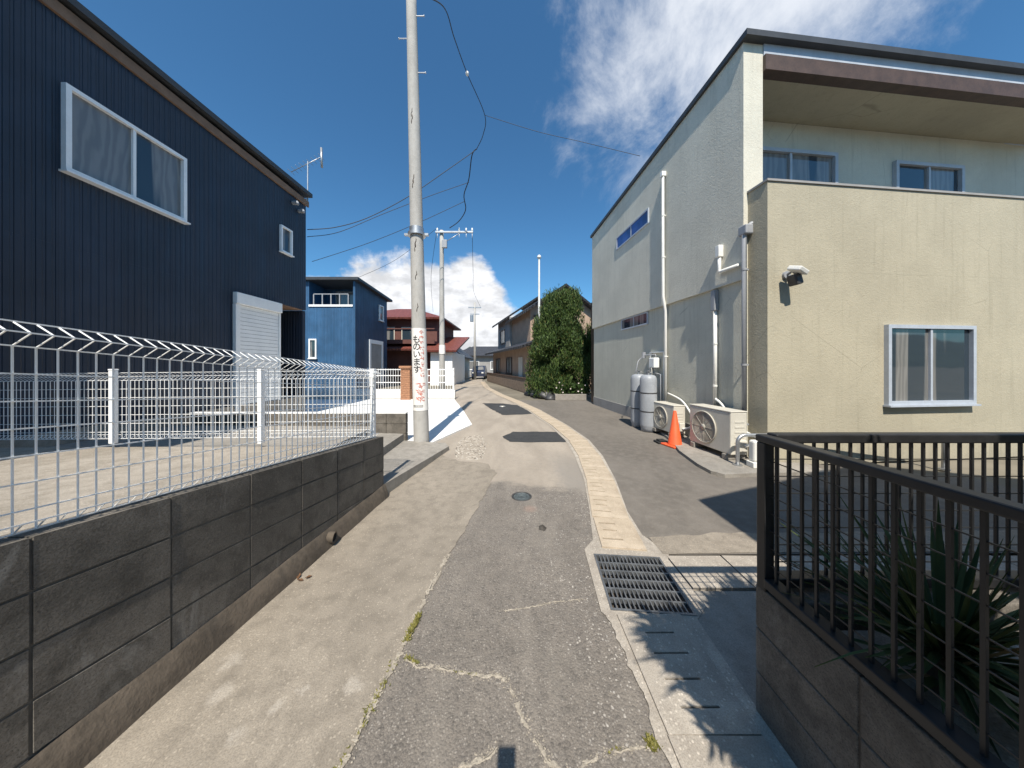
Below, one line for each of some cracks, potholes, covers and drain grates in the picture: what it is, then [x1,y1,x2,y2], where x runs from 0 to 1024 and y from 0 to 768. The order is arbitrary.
crack [402,651,663,768]
crack [503,599,588,612]
drain grate [594,554,697,616]
manhole cover [511,492,532,501]
